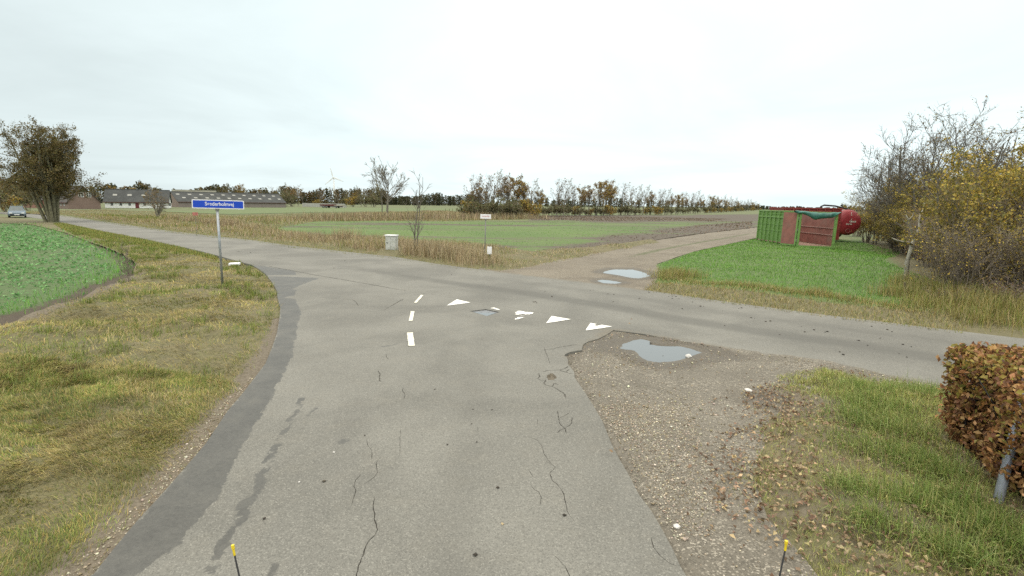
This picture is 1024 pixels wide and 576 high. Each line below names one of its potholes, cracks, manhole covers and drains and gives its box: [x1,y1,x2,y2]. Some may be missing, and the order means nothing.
pothole [612,336,711,364]
crack [356,501,378,576]
crack [530,344,578,518]
pothole [598,268,656,279]
